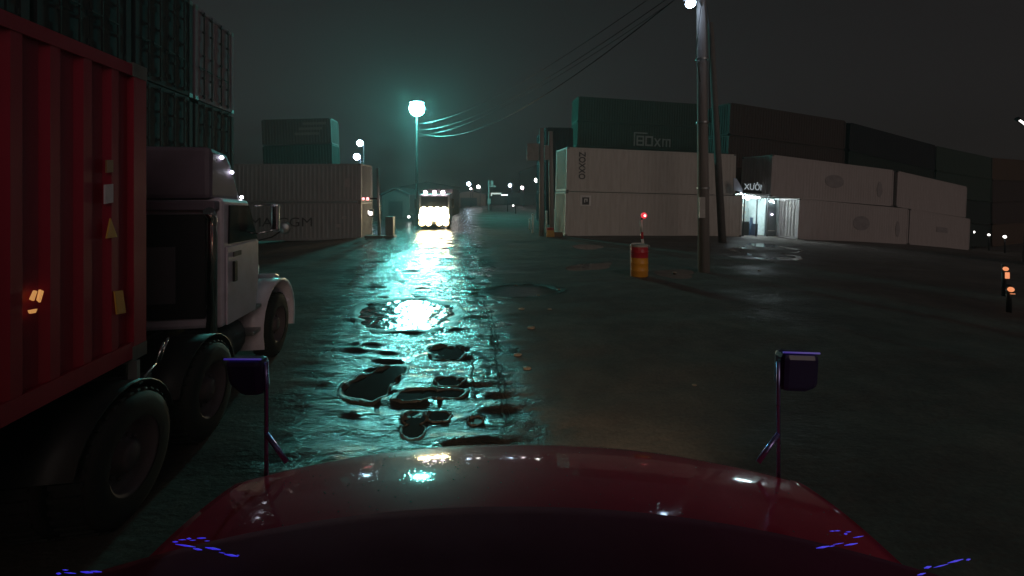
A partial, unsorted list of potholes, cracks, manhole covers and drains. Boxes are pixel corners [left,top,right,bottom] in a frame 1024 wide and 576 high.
pothole [424,410,453,423]
pothole [349,296,467,333]
pothole [399,410,429,441]
pothole [390,387,471,403]
pothole [426,343,468,361]
pothole [467,415,485,427]
pothole [433,376,467,387]
pothole [336,364,410,406]
crack [470,298,510,432]
